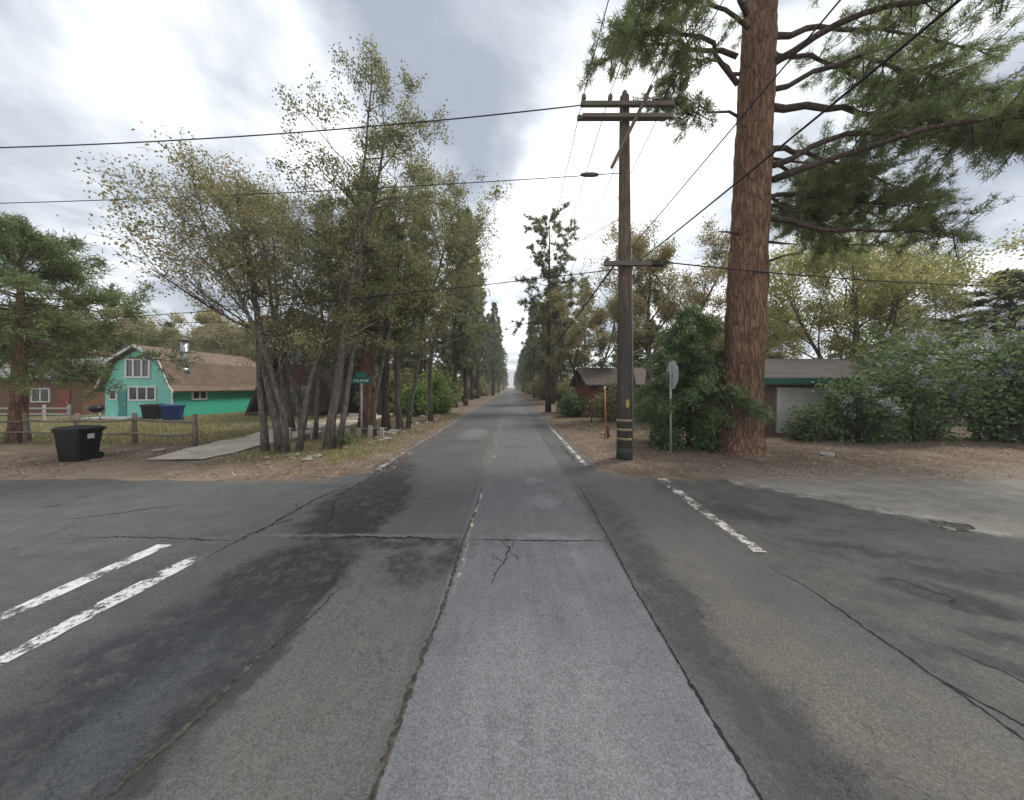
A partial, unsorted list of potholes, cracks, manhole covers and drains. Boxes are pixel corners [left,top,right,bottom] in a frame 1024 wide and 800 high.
pothole [928,520,975,532]
